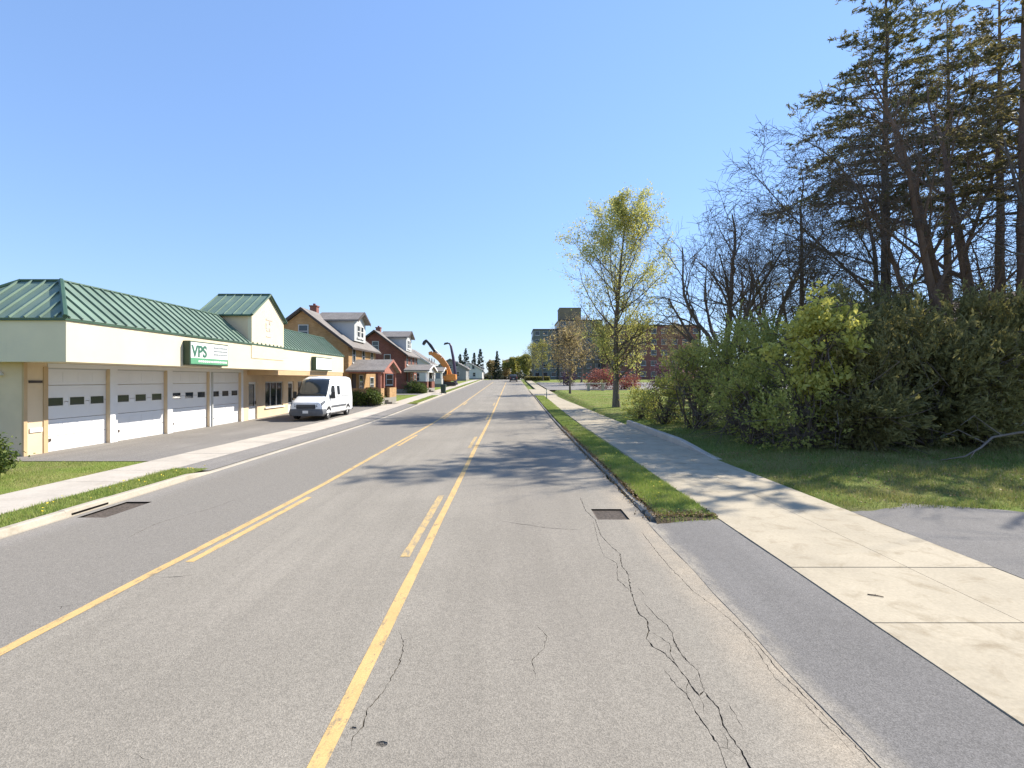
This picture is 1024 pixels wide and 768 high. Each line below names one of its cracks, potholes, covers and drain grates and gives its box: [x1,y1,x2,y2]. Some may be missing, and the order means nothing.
drain grate [591,509,630,520]
drain grate [72,502,150,518]
crack [350,630,410,751]
